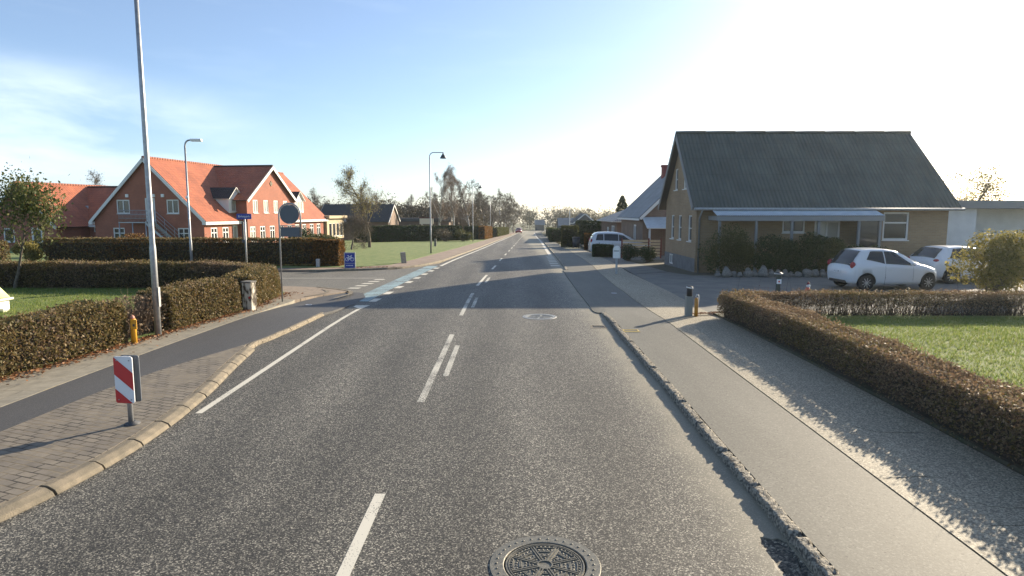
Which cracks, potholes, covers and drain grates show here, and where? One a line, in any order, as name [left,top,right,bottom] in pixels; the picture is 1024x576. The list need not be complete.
manhole cover [489,536,601,576]
